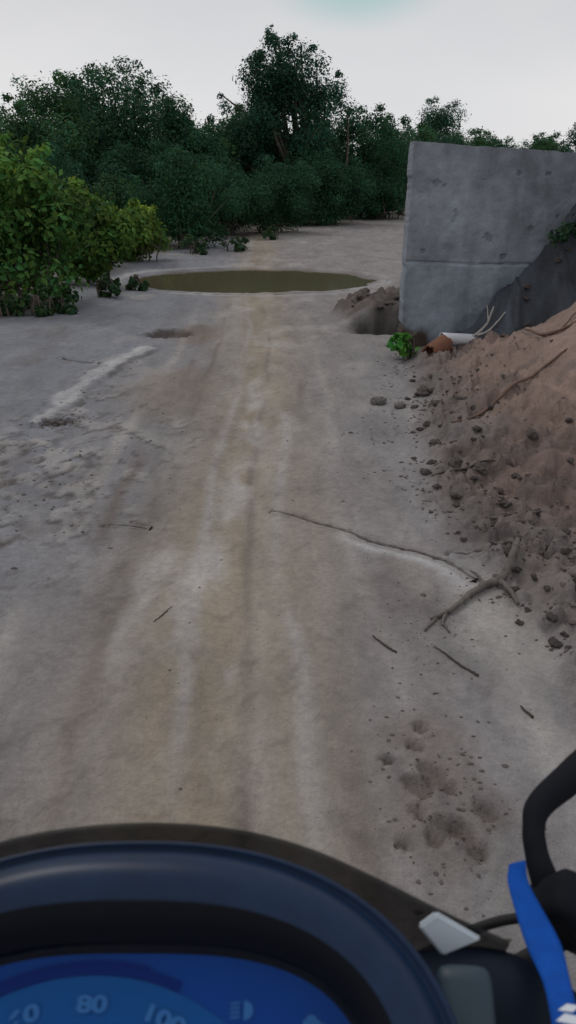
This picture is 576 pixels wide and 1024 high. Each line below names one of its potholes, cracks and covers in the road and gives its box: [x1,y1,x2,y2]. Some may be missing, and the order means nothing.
pothole [120,267,390,295]
crack [270,509,576,582]
pothole [37,417,80,429]
pothole [135,328,198,340]
